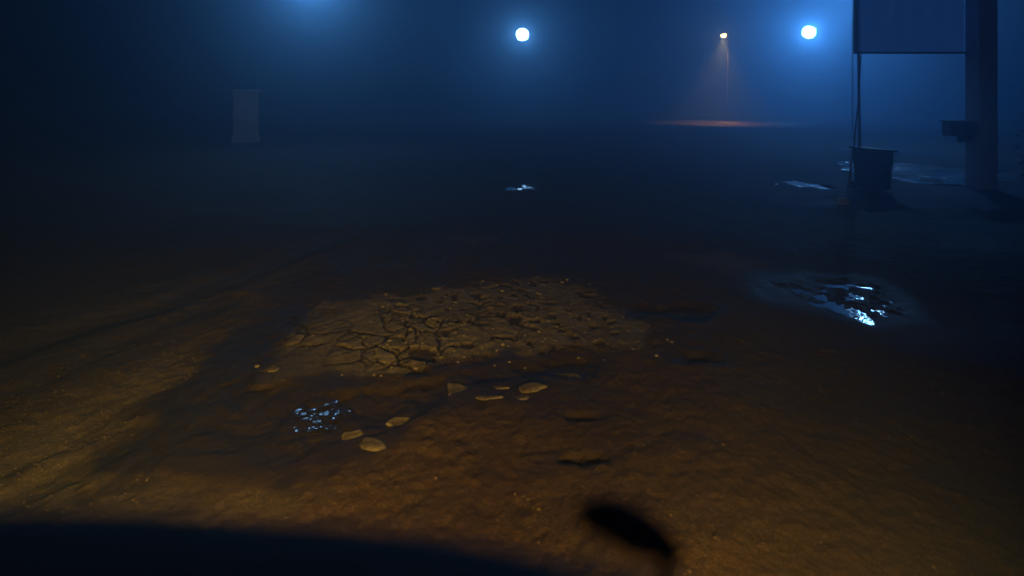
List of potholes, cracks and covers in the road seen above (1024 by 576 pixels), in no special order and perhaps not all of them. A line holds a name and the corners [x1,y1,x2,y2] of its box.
pothole [158,354,610,474]
pothole [742,272,929,328]
crack [249,274,655,385]
